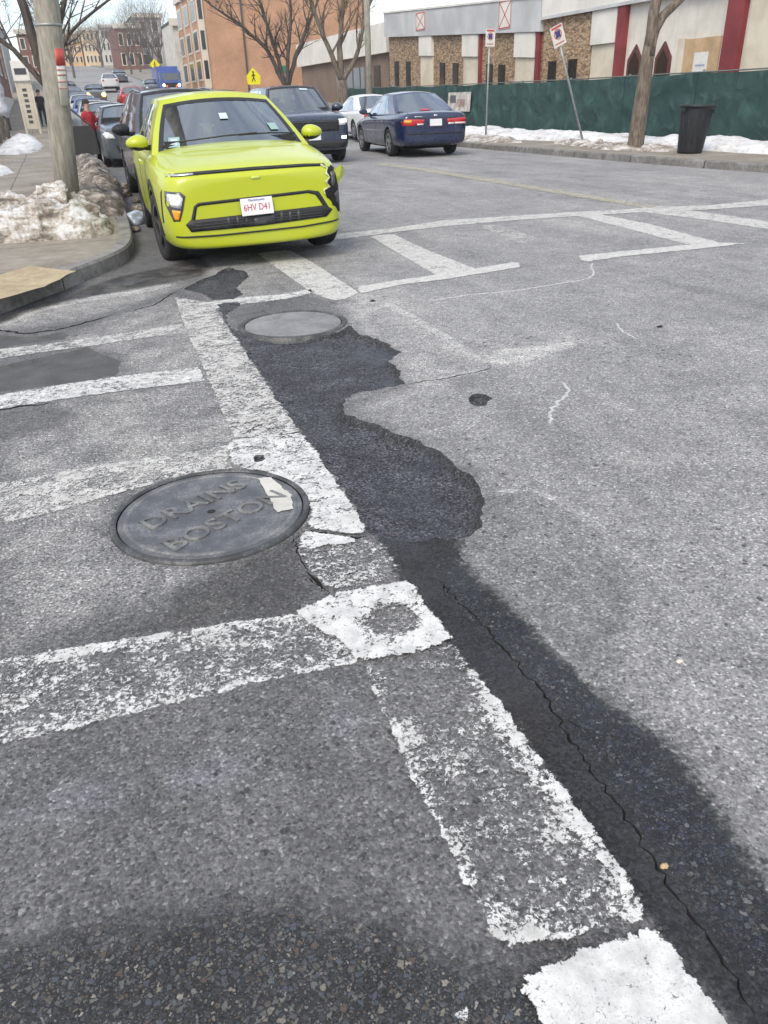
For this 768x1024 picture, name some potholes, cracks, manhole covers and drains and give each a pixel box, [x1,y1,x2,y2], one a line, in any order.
manhole cover [239,310,347,344]
crack [411,367,491,384]
crack [436,263,595,300]
crack [548,381,571,425]
pothole [468,393,492,406]
crack [425,562,757,1022]
crack [0,290,179,334]
crack [293,530,371,593]
manhole cover [109,469,310,566]
